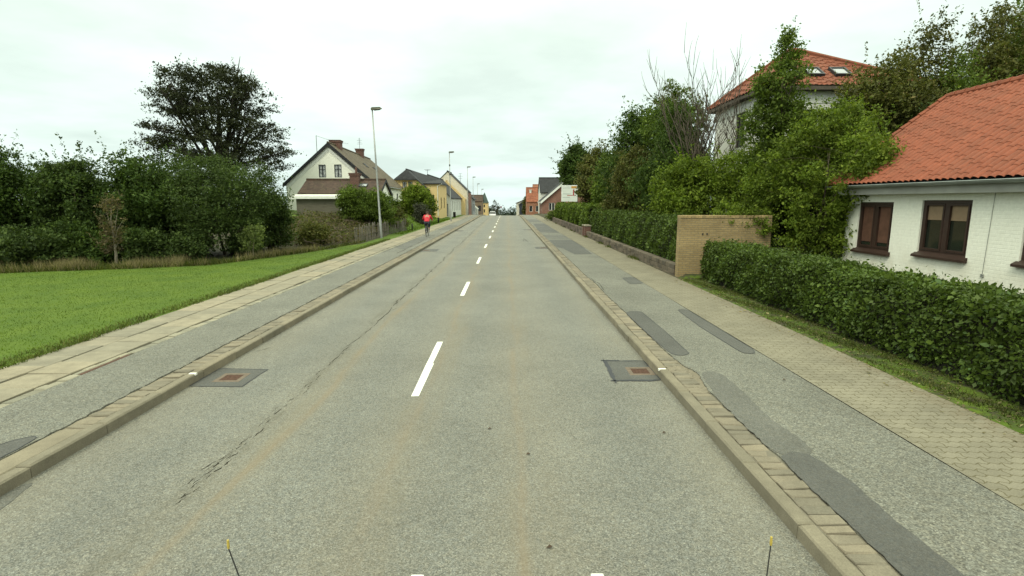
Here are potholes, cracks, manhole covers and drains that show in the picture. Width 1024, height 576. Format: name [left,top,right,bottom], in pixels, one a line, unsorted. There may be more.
crack [176,242,462,504]
